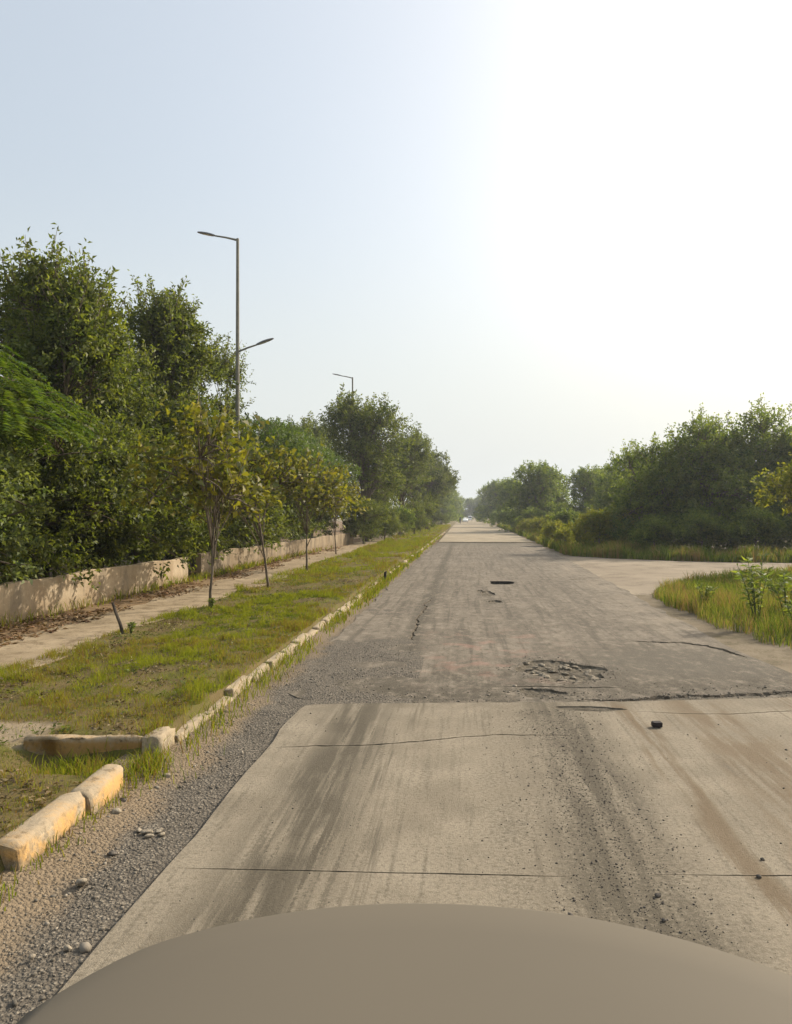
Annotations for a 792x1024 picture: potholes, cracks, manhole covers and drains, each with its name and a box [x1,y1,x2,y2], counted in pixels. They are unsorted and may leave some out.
crack [409,598,432,649]
crack [638,641,745,657]
crack [296,734,571,747]
pothole [515,660,608,683]
crack [509,686,792,714]
